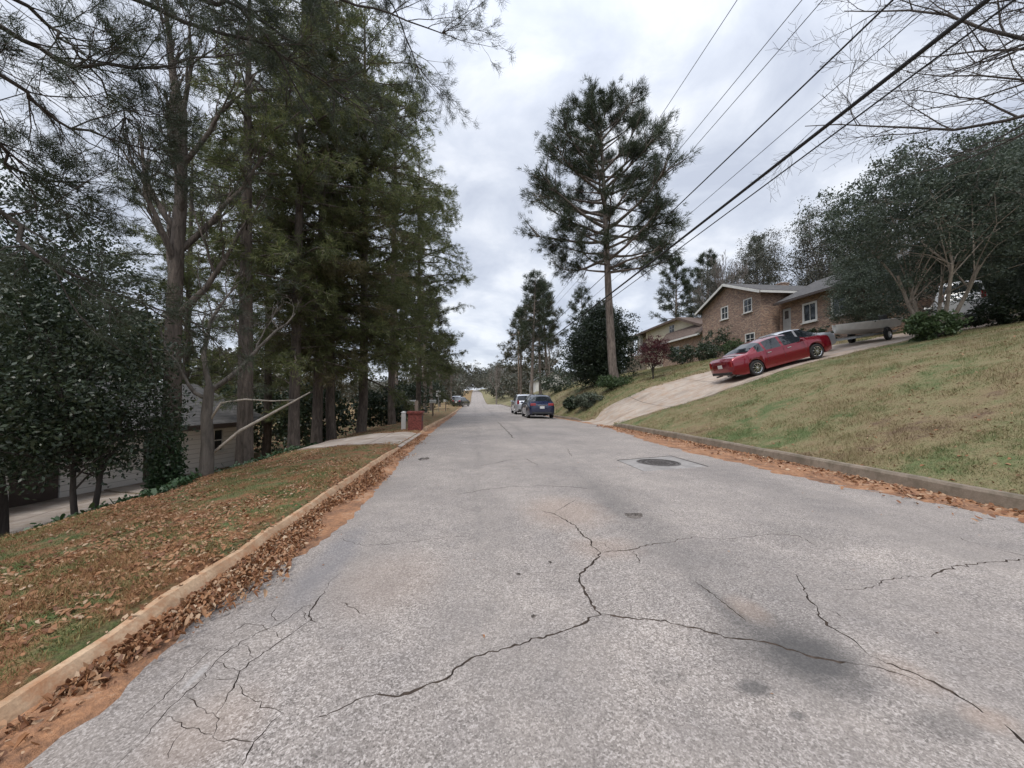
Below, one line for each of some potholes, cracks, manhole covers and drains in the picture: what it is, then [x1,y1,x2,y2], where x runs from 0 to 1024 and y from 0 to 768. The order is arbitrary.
crack [117,575,338,765]
crack [846,538,1024,590]
crack [317,500,983,718]
